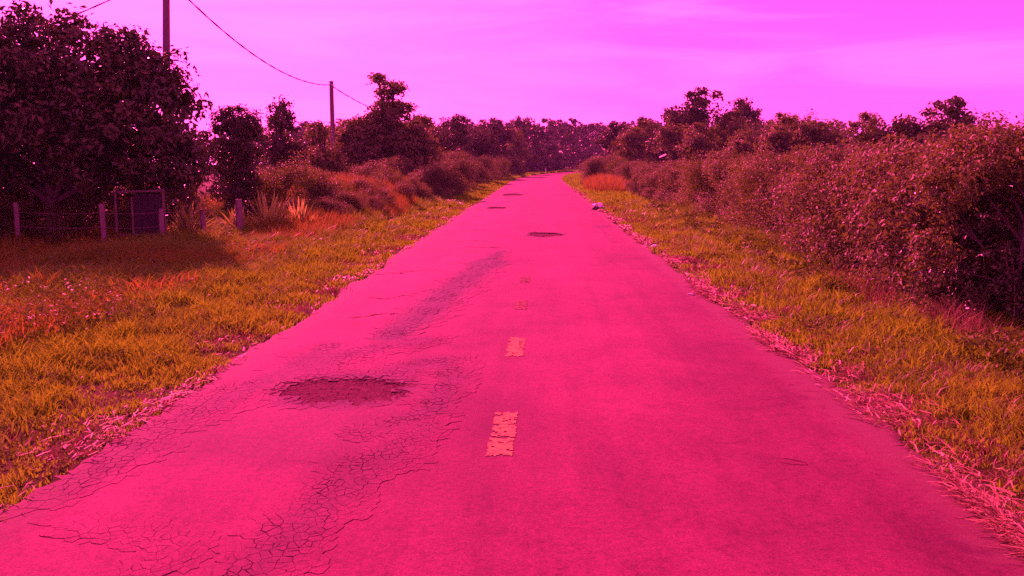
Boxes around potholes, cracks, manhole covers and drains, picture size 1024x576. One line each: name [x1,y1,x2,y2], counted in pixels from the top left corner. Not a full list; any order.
pothole [264,376,421,409]
crack [0,216,512,576]
